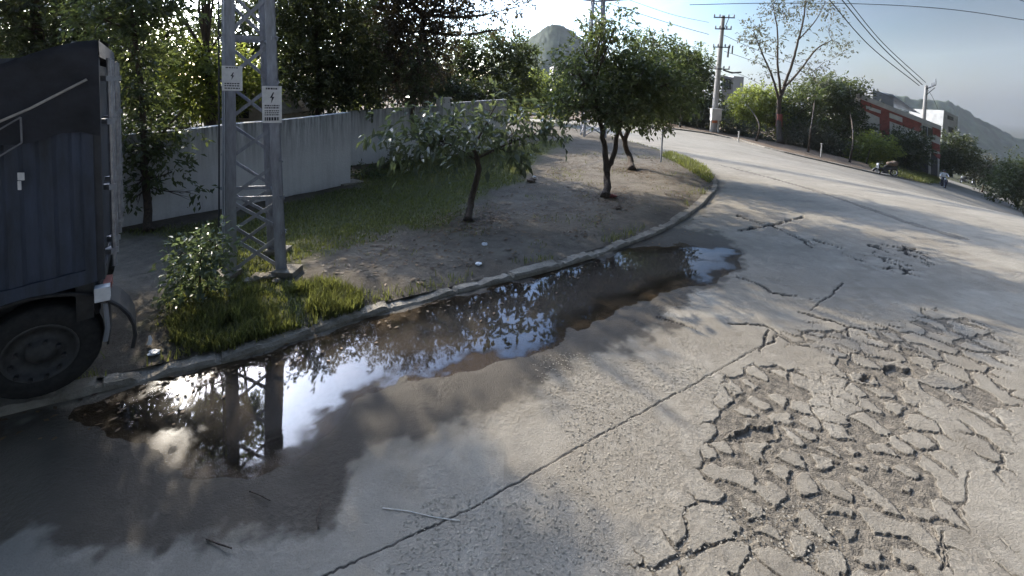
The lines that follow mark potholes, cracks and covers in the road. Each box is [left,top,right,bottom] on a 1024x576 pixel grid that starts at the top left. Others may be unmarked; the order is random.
crack [619,278,1022,576]
crack [736,215,932,277]
